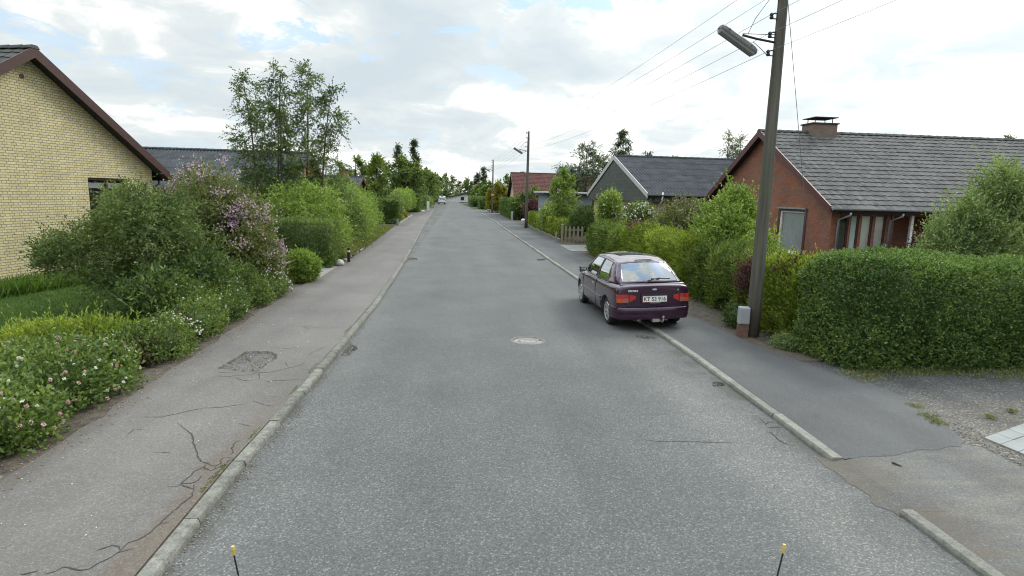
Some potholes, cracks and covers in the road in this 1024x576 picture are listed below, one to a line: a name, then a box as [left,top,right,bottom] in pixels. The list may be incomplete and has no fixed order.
manhole cover [511,336,545,345]
crack [23,402,271,574]
